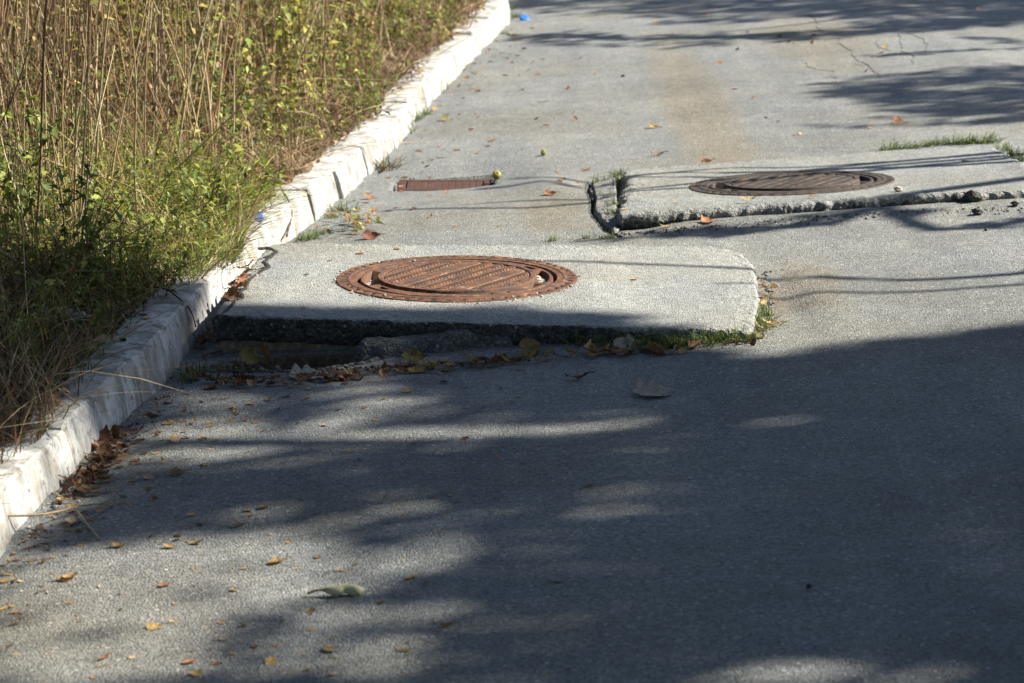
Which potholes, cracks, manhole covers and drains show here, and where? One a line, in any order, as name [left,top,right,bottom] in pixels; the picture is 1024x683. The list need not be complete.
crack [806,14,928,79]
